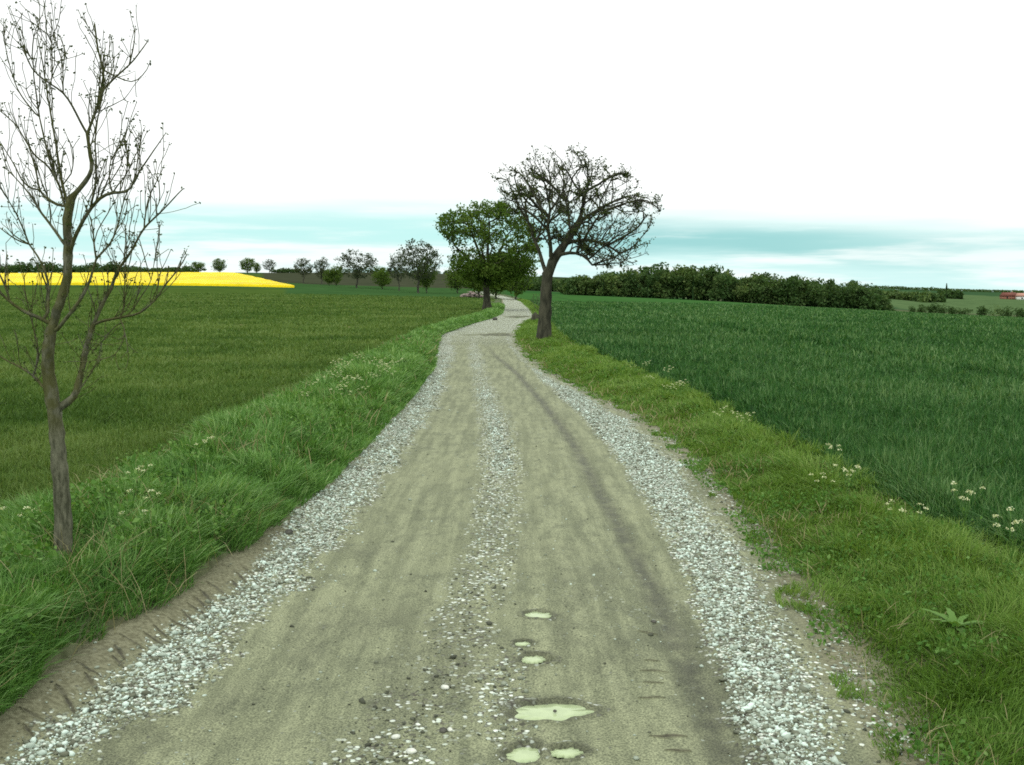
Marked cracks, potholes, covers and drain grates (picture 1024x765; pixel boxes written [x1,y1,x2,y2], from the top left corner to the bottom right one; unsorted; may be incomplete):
pothole [538,740,598,763]
pothole [496,695,615,725]
pothole [510,638,538,648]
pothole [517,608,558,621]
pothole [495,738,553,765]
pothole [512,650,563,667]
